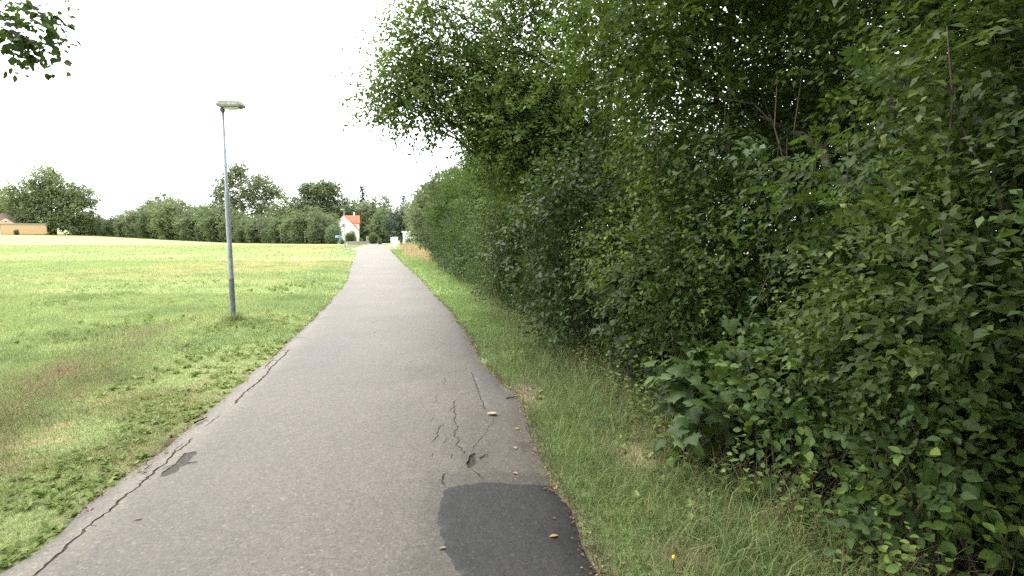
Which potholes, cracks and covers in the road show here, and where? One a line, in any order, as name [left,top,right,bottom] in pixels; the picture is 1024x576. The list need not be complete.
crack [430,370,494,487]
